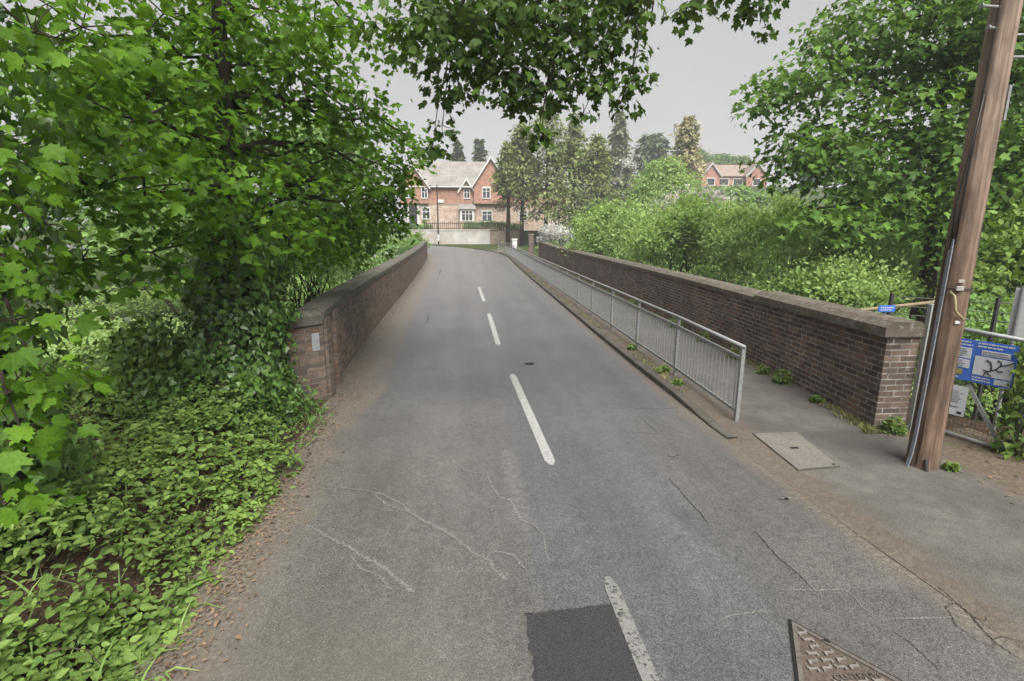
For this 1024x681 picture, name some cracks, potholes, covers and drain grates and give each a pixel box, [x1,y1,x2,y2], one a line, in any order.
crack [793,579,1020,664]
manhole cover [752,432,840,471]
crack [305,452,549,593]
manhole cover [788,618,902,681]
